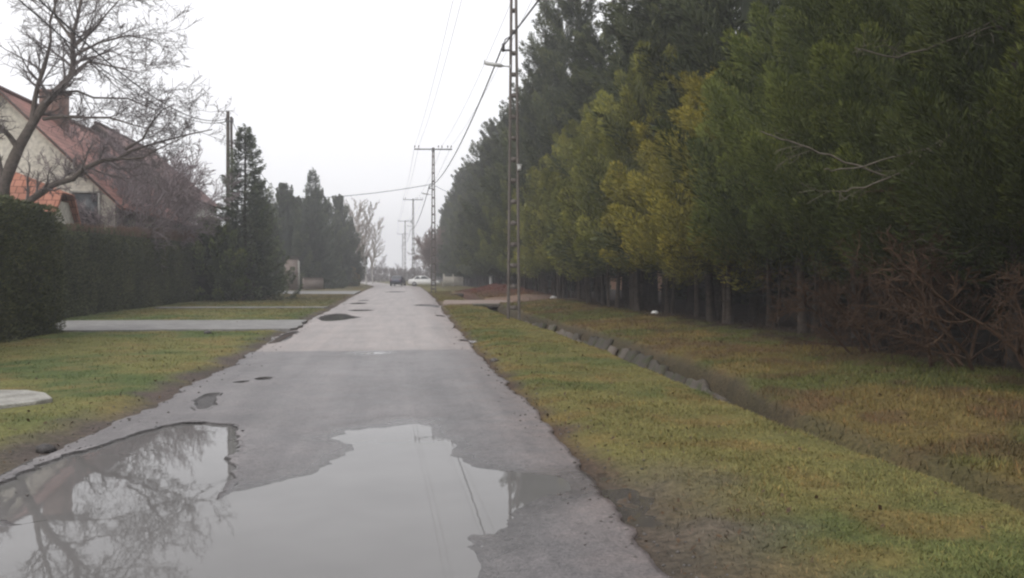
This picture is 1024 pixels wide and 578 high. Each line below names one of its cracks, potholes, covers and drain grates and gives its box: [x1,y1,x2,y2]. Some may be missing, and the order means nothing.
pothole [312,313,366,322]
pothole [183,392,225,411]
